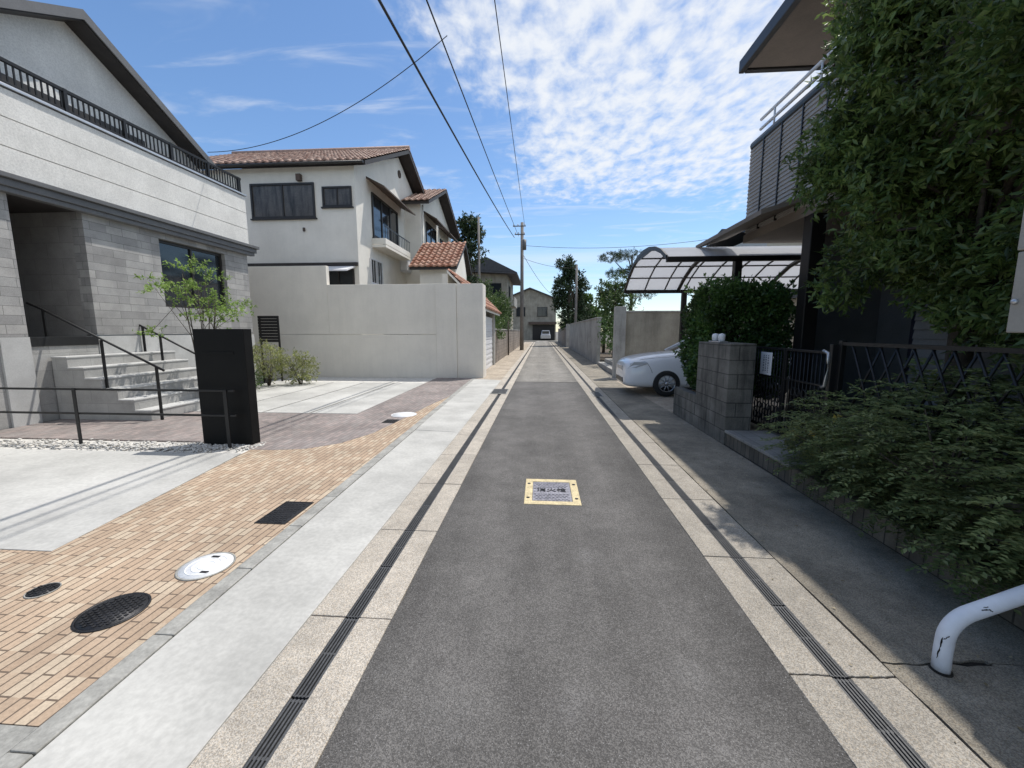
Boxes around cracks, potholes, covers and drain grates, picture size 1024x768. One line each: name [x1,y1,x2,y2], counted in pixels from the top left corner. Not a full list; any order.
manhole cover [524,479,582,506]
drain grate [666,480,691,500]
drain grate [437,468,454,485]
manhole cover [71,592,152,633]
manhole cover [175,552,236,581]
manhole cover [23,582,62,599]
drain grate [346,566,392,619]
drain grate [682,499,713,525]
drain grate [242,698,308,768]
drain grate [703,524,742,559]
drain grate [771,605,848,680]
